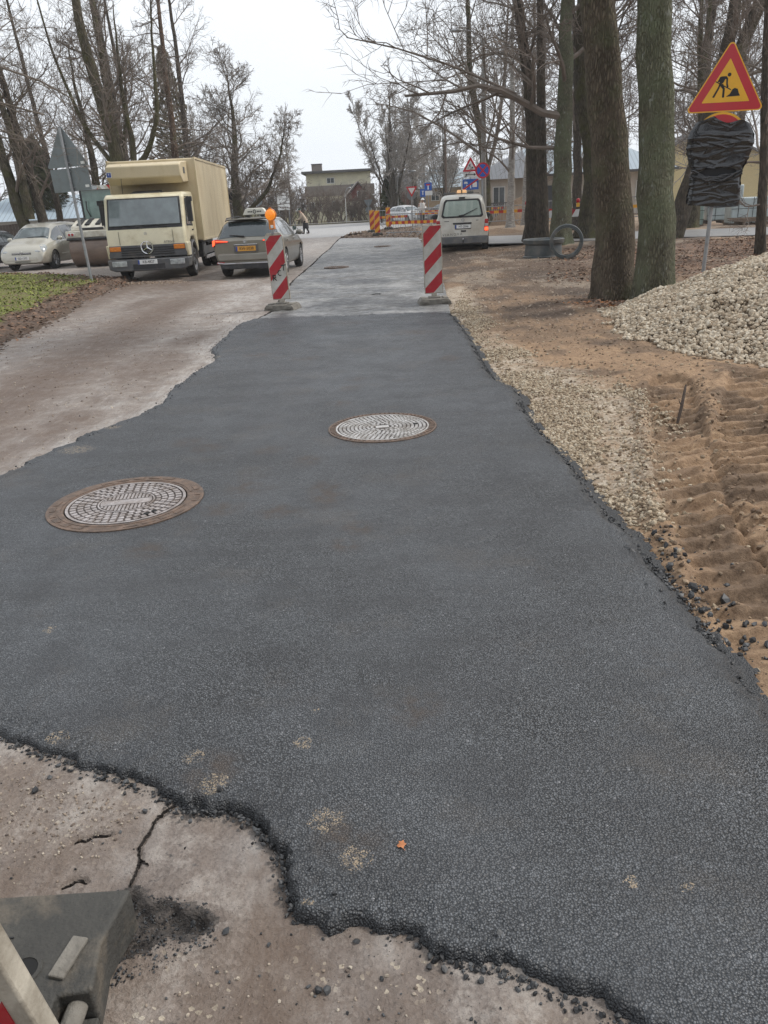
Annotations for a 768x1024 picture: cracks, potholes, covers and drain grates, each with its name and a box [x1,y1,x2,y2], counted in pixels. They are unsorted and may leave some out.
manhole cover [45,476,204,533]
crack [129,804,176,888]
manhole cover [328,413,437,443]
crack [75,835,111,845]
crack [61,879,87,890]
